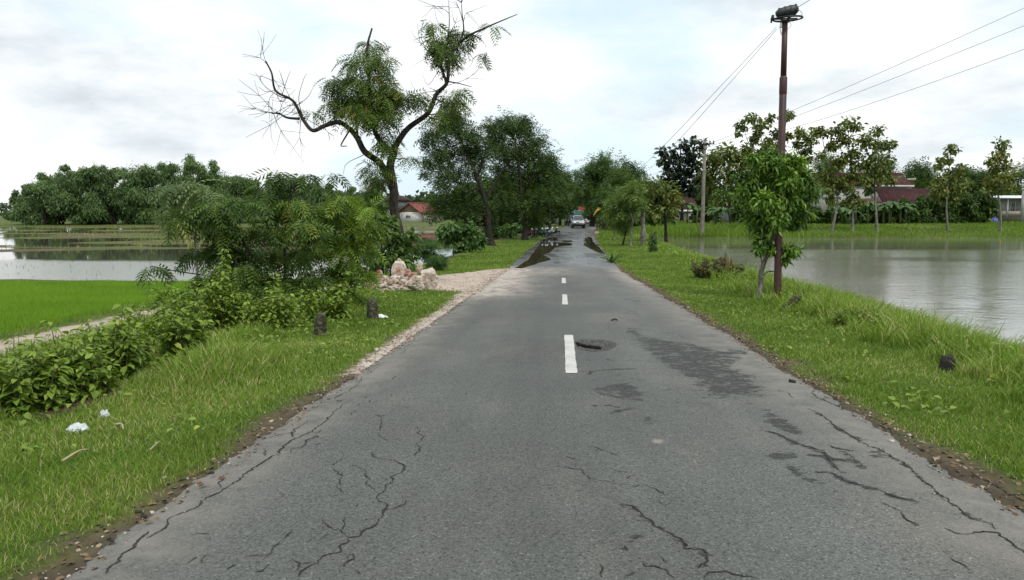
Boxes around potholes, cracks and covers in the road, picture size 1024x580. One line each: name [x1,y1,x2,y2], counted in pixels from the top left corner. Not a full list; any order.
crack [762,393,1024,552]
crack [557,446,756,578]
crack [105,367,424,576]
